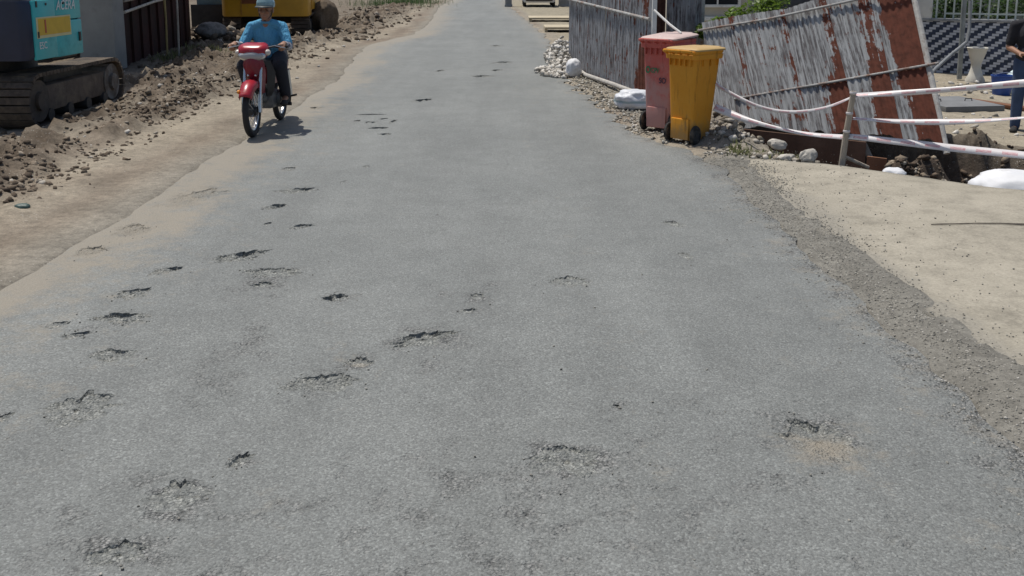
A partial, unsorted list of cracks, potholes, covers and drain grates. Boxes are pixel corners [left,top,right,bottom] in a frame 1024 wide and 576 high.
pothole [322,293,351,301]
pothole [772,418,858,465]
pothole [138,478,215,513]
pothole [85,313,153,324]
pothole [110,287,151,301]
pothole [344,356,375,367]
pothole [224,451,256,469]
pothole [243,267,303,277]
pothole [211,249,273,263]
pothole [166,188,232,205]
pothole [527,445,602,479]
pothole [276,373,363,392]
